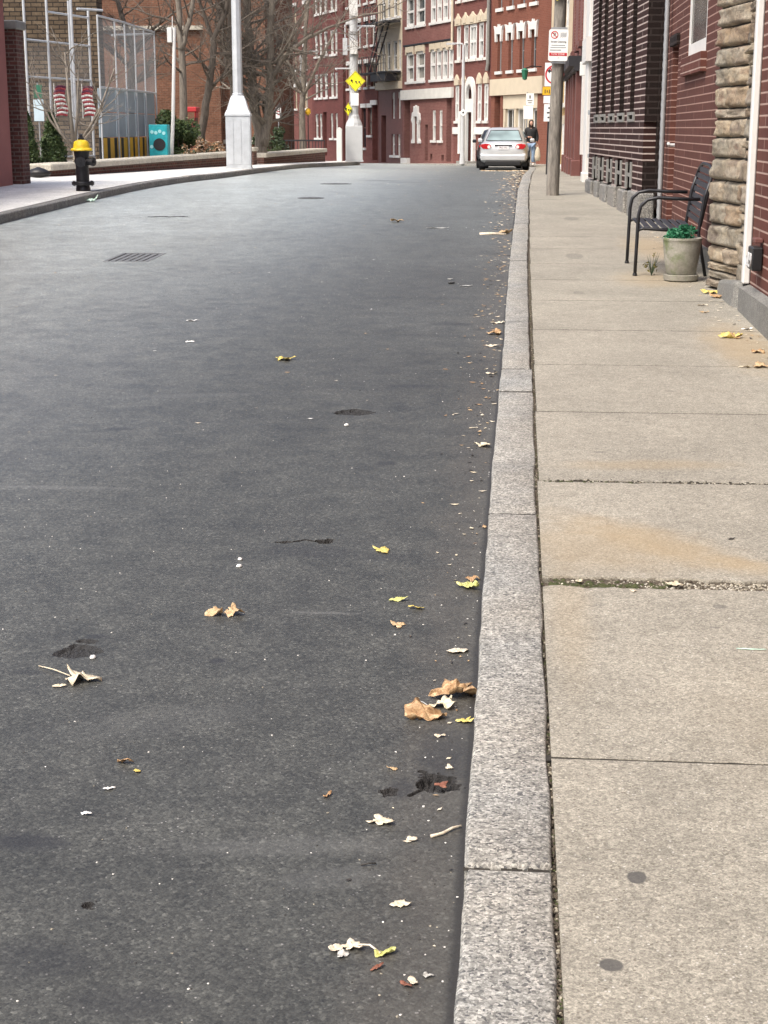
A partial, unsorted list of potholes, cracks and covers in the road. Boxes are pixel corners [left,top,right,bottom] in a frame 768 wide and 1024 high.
drain grate [103,253,166,262]
pothole [407,770,466,797]
pothole [52,639,104,659]
